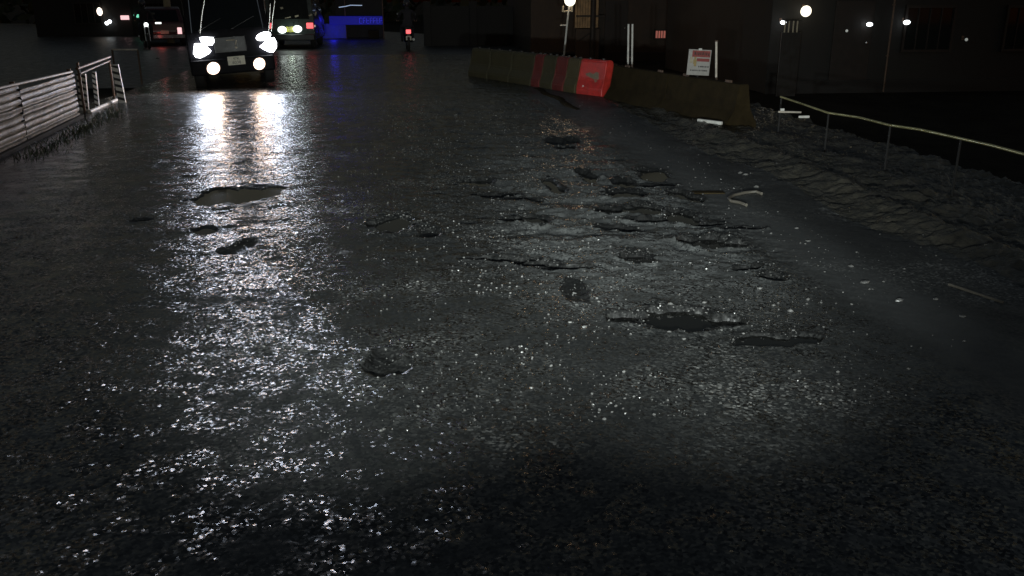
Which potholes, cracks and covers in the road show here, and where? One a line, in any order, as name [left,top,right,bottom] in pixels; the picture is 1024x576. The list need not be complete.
pothole [729,331,827,347]
pothole [609,176,677,188]
pothole [617,248,657,263]
pothole [181,183,290,208]
crack [458,254,597,270]
pothole [604,299,751,332]
pothole [189,224,221,235]
pothole [540,175,570,193]
pothole [631,167,671,182]
pothole [559,276,592,304]
